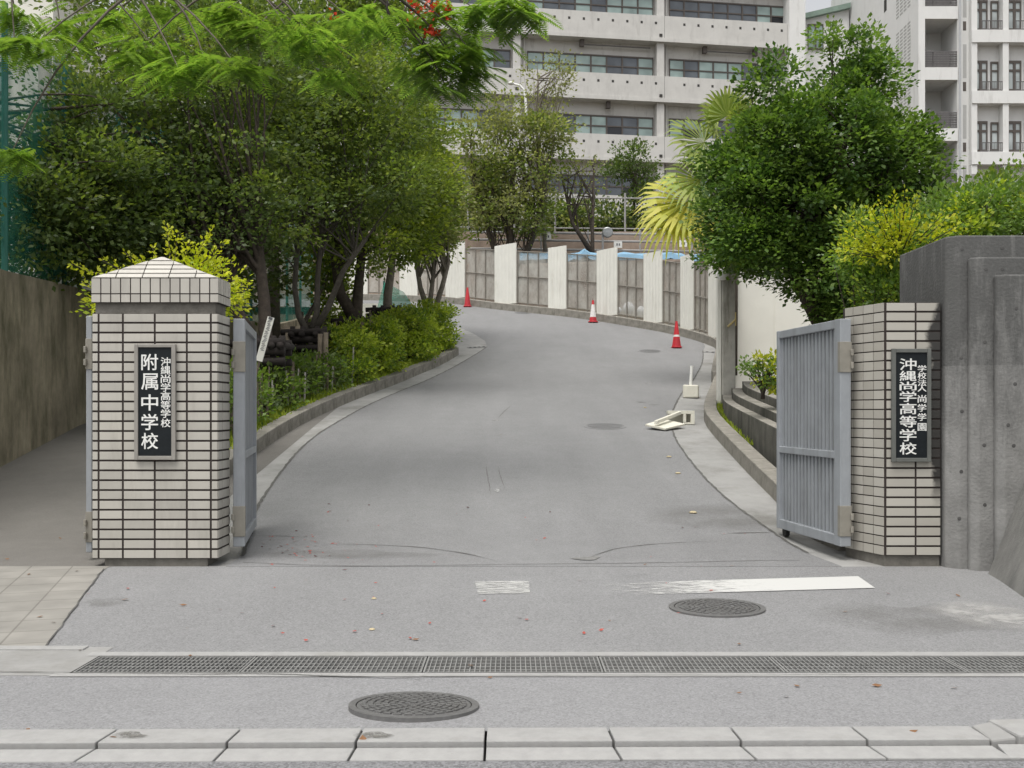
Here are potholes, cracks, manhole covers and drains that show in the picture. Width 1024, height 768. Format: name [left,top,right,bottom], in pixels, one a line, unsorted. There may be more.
drain grate [241,656,427,673]
manhole cover [348,691,479,723]
drain grate [423,656,604,673]
drain grate [940,656,1024,673]
drain grate [599,656,786,673]
manhole cover [669,598,766,618]
drain grate [770,656,968,673]
drain grate [72,656,256,673]
